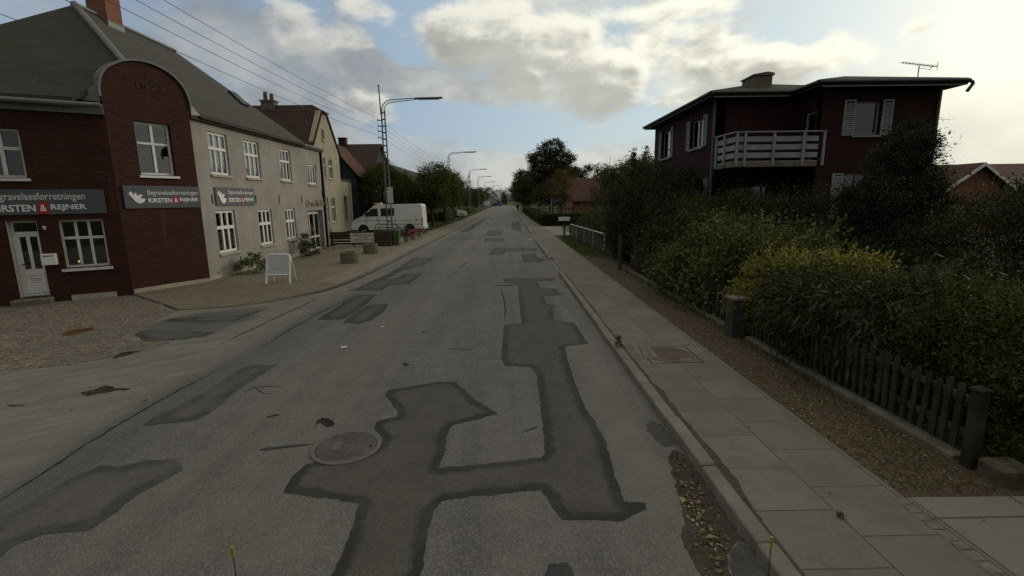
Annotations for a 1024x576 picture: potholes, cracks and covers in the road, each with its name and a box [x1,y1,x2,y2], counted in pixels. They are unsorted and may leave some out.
pothole [80,385,129,396]
manhole cover [638,346,705,363]
pothole [314,418,335,427]
manhole cover [310,430,382,465]
